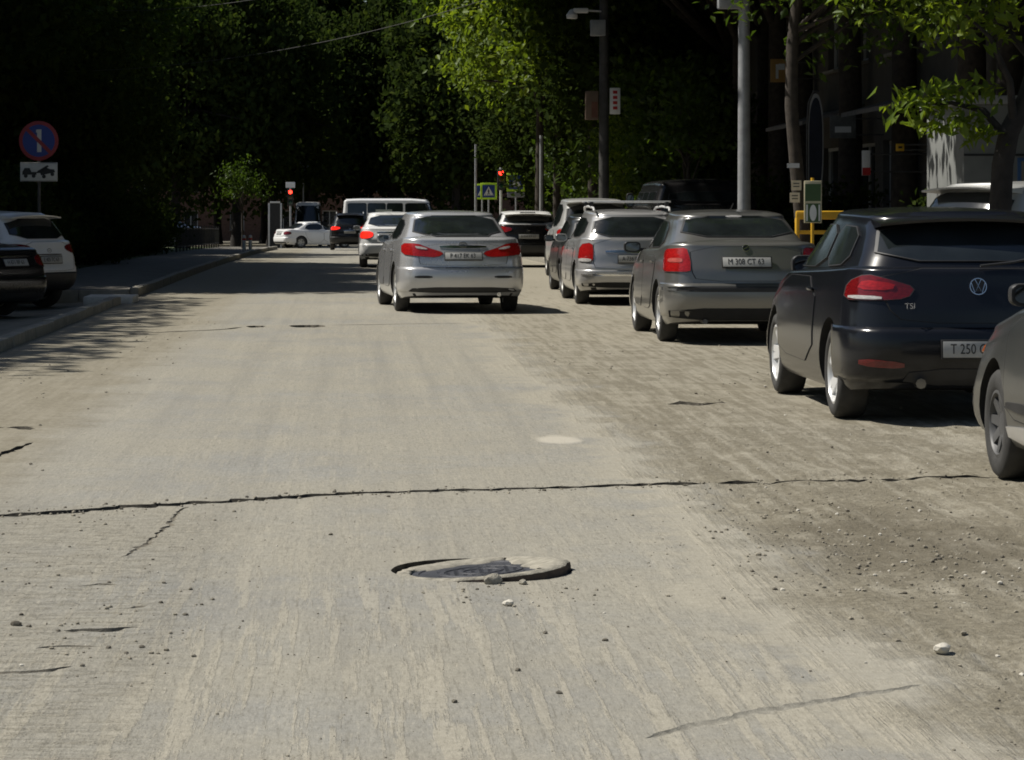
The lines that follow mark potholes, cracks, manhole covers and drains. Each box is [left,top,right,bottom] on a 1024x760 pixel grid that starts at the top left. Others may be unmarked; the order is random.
crack [0,426,34,456]
manhole cover [391,556,572,582]
crack [647,684,926,738]
crack [0,475,995,674]
